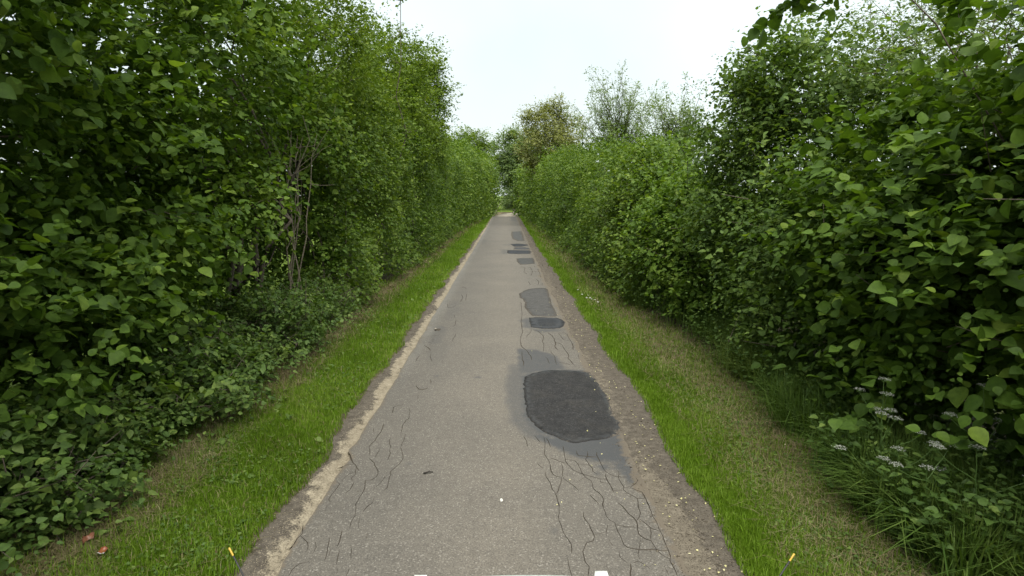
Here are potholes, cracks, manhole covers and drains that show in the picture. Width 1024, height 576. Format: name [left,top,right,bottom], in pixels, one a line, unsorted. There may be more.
crack [524,436,677,576]
crack [289,287,467,576]
crack [520,306,579,366]
